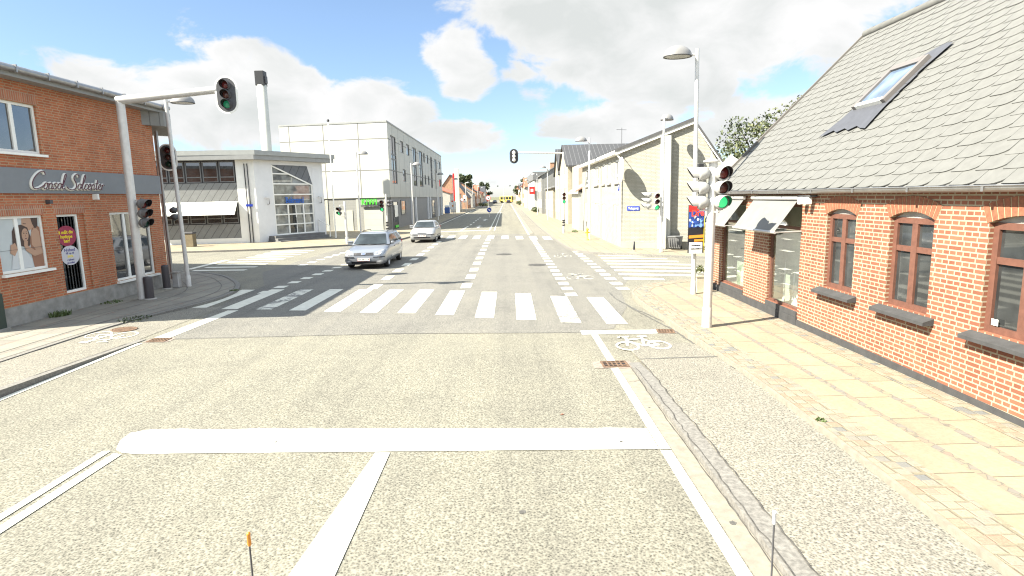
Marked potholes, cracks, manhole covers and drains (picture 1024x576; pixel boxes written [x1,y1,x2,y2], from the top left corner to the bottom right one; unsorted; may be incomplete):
drain grate [592,360,631,368]
